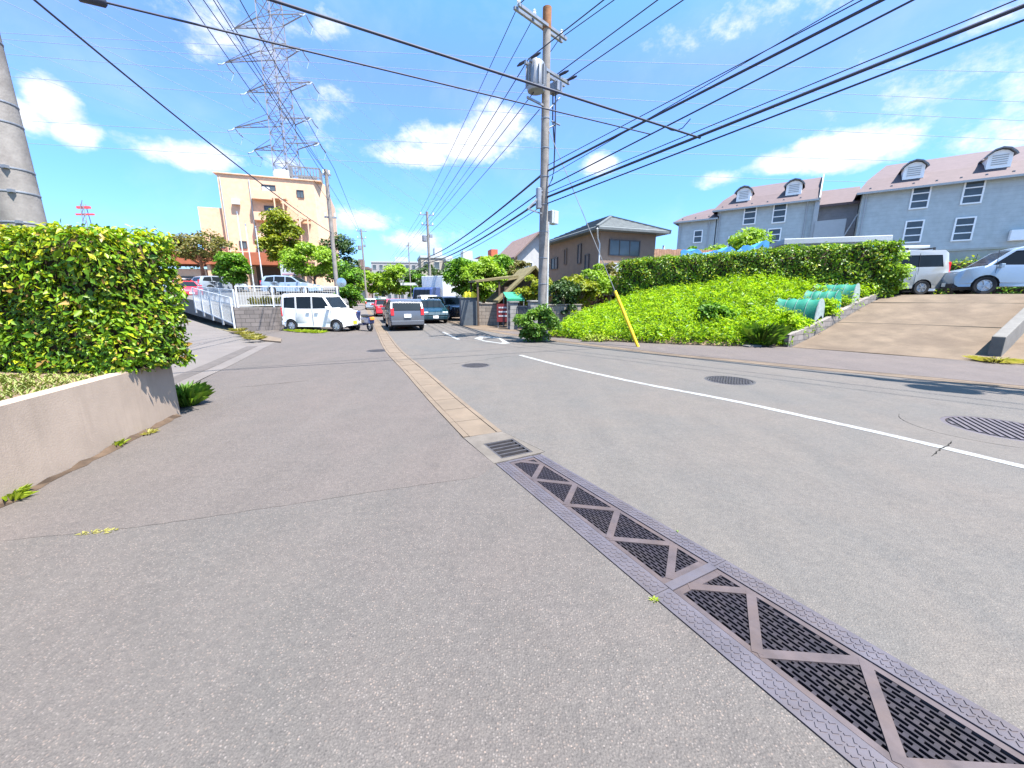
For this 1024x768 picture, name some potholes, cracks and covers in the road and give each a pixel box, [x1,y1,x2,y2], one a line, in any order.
drain grate [484,439,532,459]
manhole cover [940,416,1024,442]
crack [899,417,1019,456]
drain grate [510,458,707,584]
drain grate [673,569,1024,768]
manhole cover [704,376,756,385]
